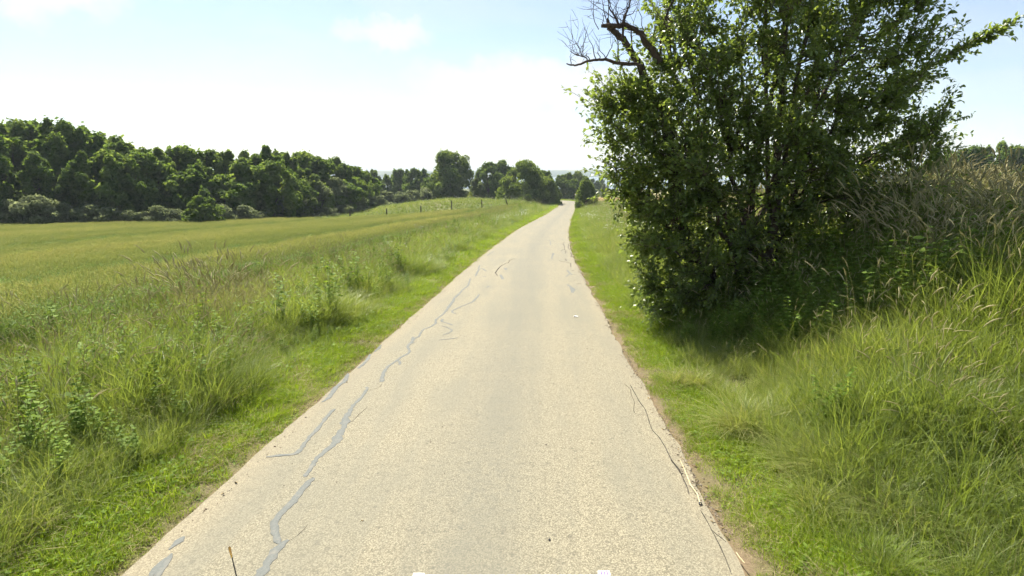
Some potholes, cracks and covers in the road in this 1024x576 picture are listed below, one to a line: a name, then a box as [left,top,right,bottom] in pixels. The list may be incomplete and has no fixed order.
crack [627,385,732,574]
